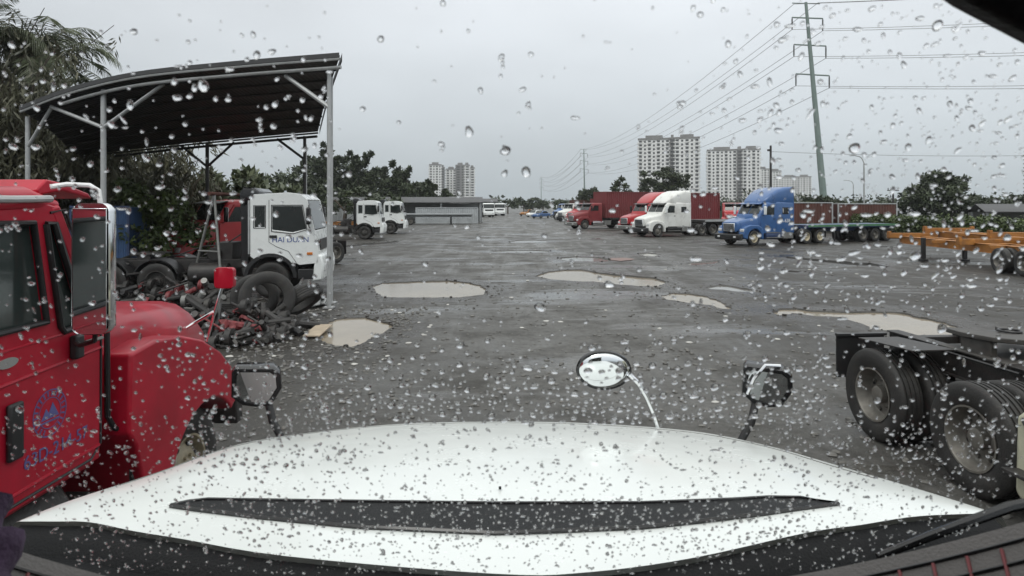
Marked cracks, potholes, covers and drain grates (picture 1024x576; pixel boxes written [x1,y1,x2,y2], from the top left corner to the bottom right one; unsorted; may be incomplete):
pothole [656,292,732,309]
pothole [772,307,958,335]
pothole [368,279,489,298]
pothole [320,315,400,347]
pothole [536,269,669,287]
pothole [706,284,761,292]
